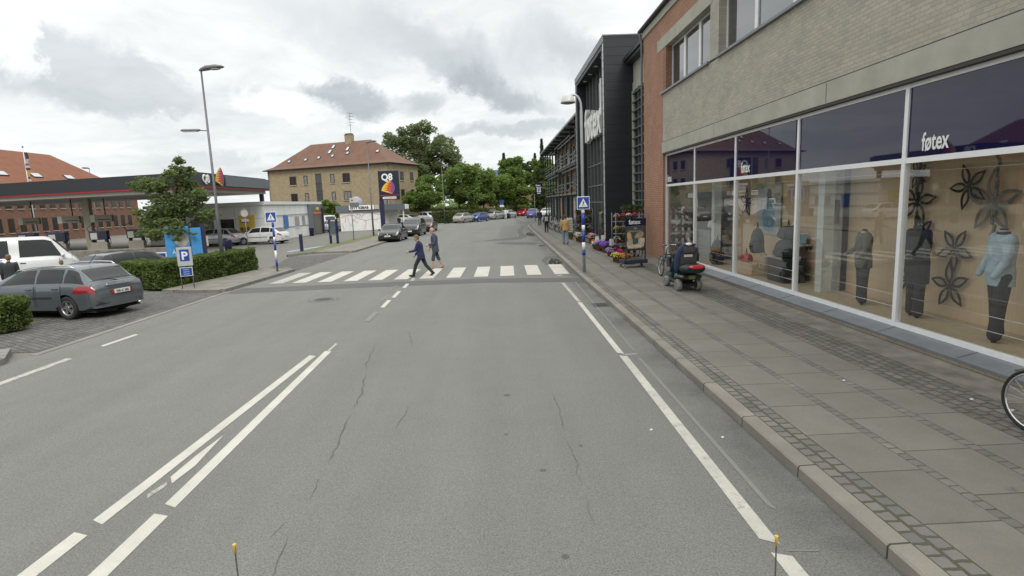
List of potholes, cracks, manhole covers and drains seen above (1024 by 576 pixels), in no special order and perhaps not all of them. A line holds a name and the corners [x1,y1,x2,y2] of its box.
crack [553,395,596,525]
crack [272,347,374,576]
